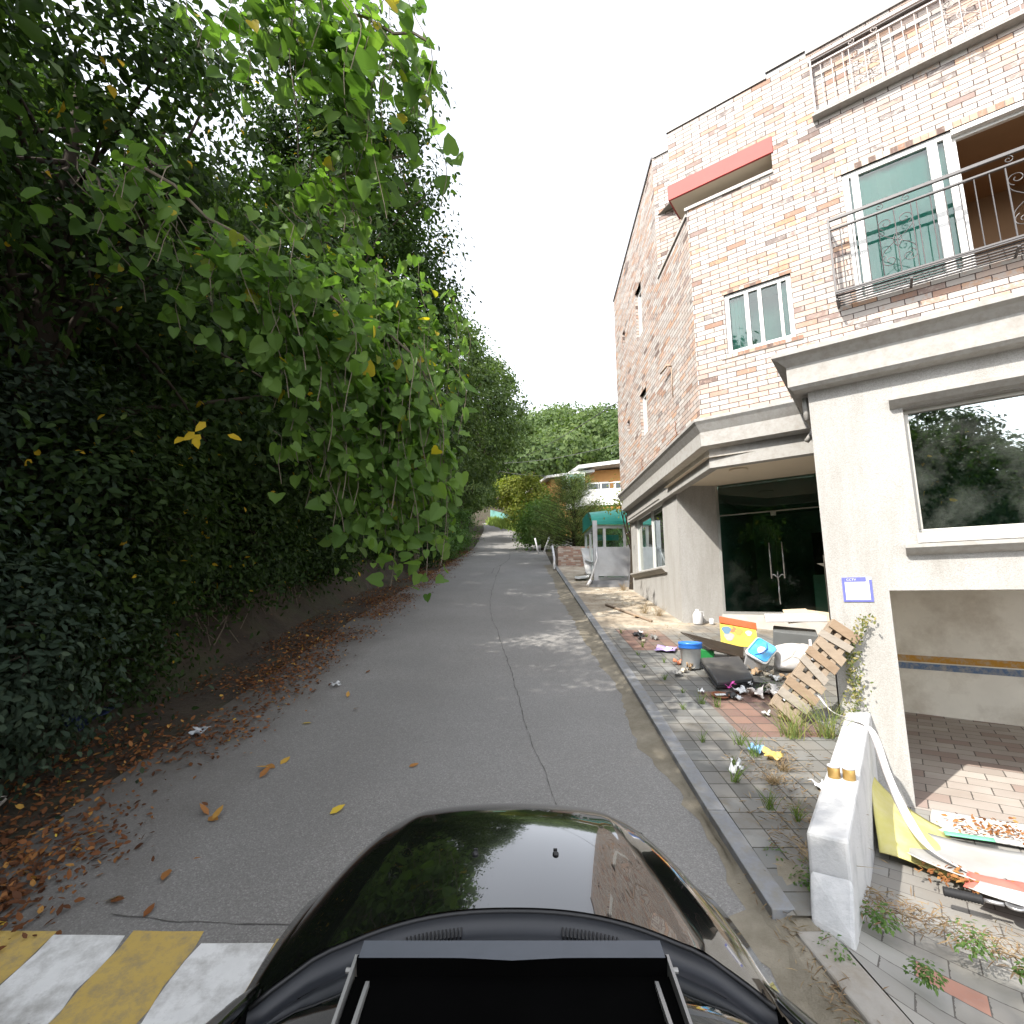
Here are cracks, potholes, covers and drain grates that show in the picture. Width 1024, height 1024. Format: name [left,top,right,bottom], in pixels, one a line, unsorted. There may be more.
crack [490,555,557,805]
crack [110,913,290,925]
